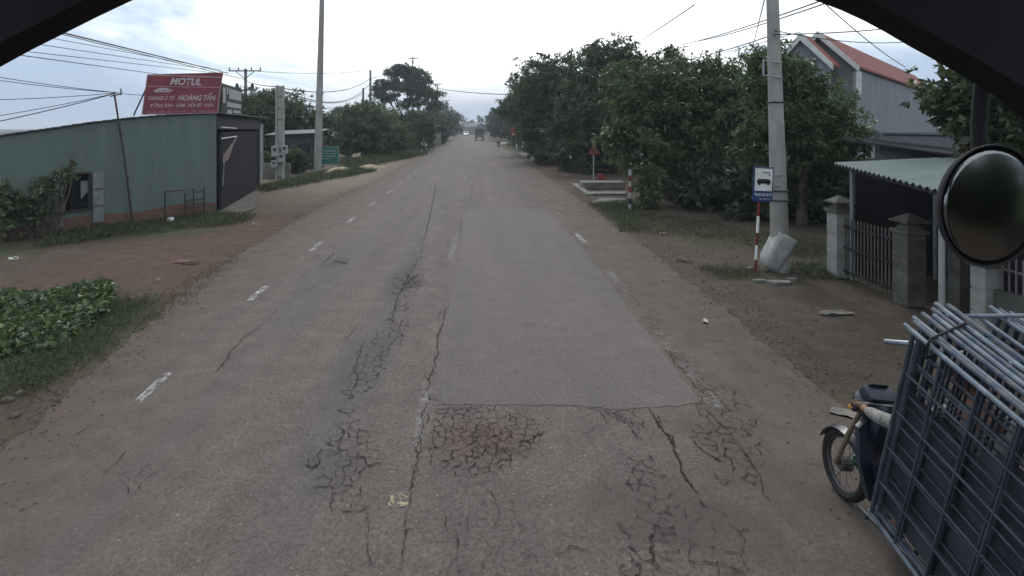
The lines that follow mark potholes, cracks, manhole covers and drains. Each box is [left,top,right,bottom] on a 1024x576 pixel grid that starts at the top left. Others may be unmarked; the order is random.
crack [75,423,167,496]
crack [546,278,771,576]
crack [302,242,427,519]
crack [366,185,546,575]
